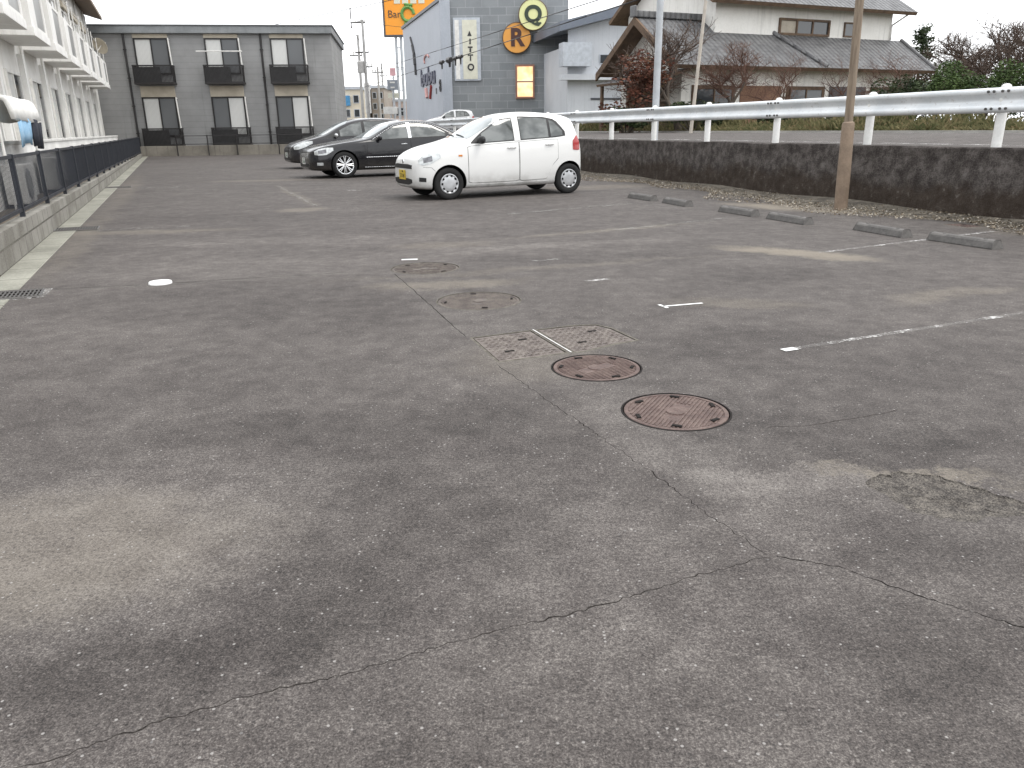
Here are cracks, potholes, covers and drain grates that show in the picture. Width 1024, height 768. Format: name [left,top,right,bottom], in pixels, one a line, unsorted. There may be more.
manhole cover [551,354,643,382]
manhole cover [534,324,640,353]
crack [767,410,895,428]
manhole cover [621,393,732,432]
manhole cover [470,330,569,363]
crack [14,556,1024,768]
manhole cover [436,292,521,310]
manhole cover [390,262,460,274]
drain grate [0,288,45,300]
